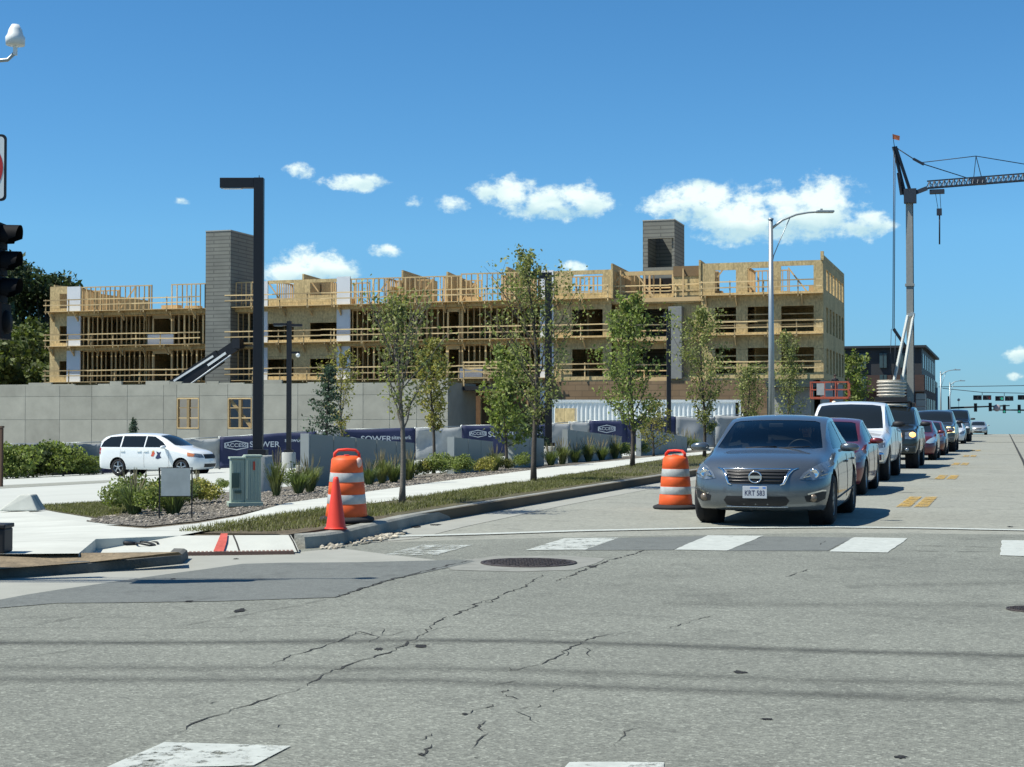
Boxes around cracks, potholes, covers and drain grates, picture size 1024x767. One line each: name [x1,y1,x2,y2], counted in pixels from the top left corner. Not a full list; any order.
manhole cover [480,558,577,567]
crack [466,630,629,758]
crack [180,550,644,732]
